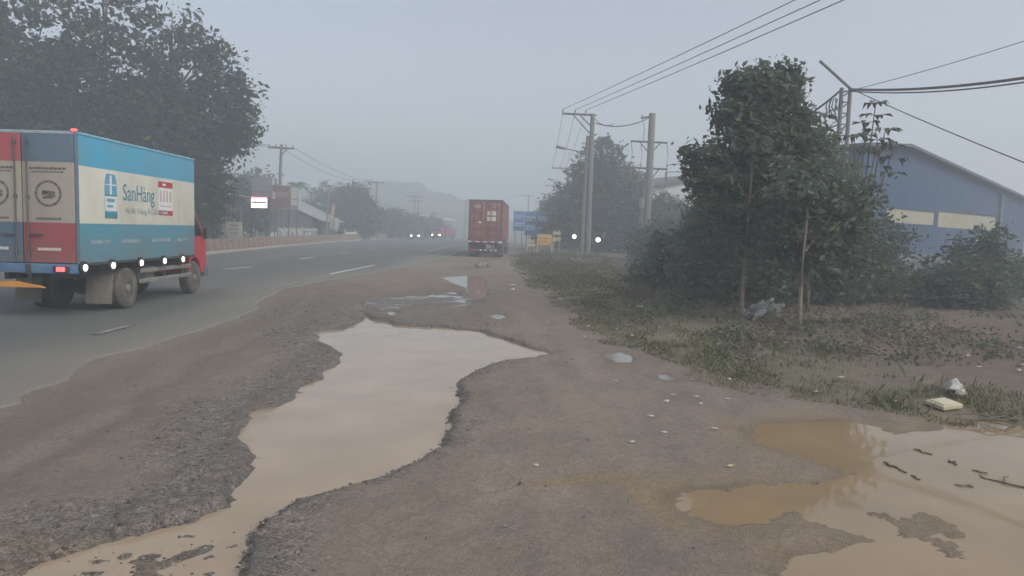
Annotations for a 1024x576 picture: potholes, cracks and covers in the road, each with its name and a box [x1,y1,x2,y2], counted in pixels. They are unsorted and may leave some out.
pothole [0,313,557,576]
pothole [354,291,492,315]
pothole [441,275,493,300]
